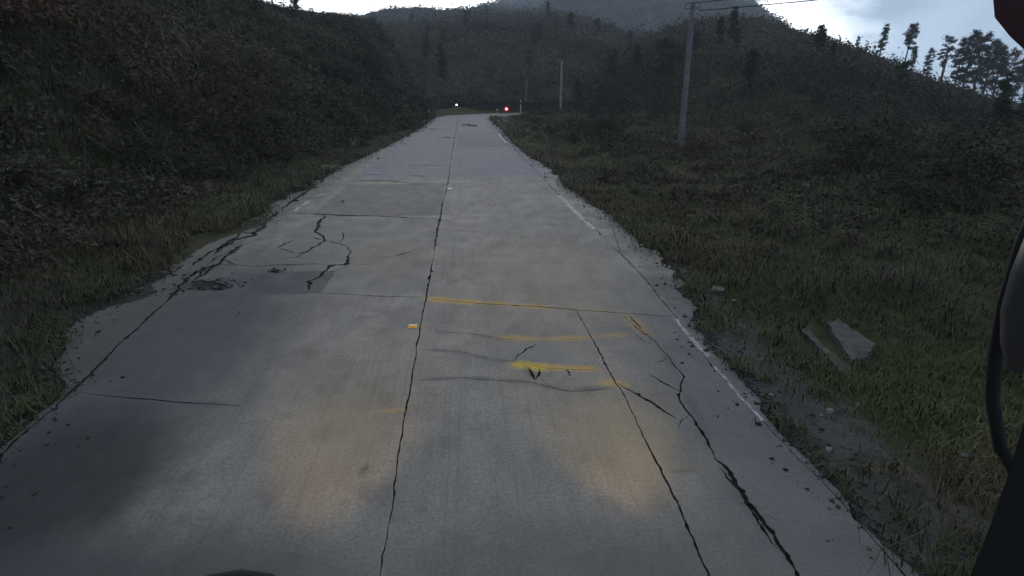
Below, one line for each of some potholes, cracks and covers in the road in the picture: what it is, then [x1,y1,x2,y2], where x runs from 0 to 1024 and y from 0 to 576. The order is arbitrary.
pothole [189,279,230,290]
crack [429,309,800,576]
crack [165,160,364,302]
